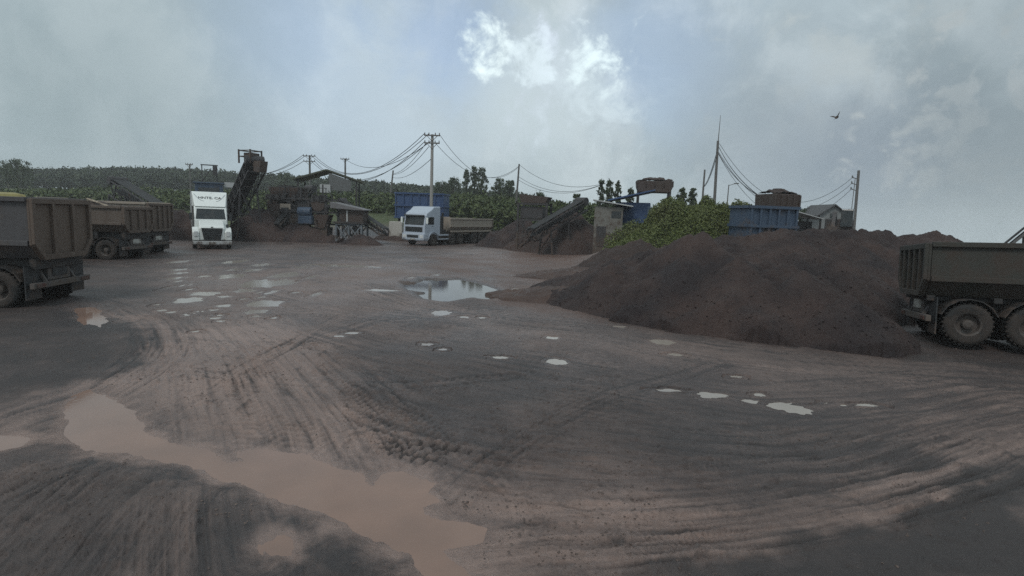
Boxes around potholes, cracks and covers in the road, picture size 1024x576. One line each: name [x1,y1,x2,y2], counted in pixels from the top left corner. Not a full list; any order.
pothole [539,357,574,367]
pothole [683,390,742,401]
pothole [757,400,823,418]
